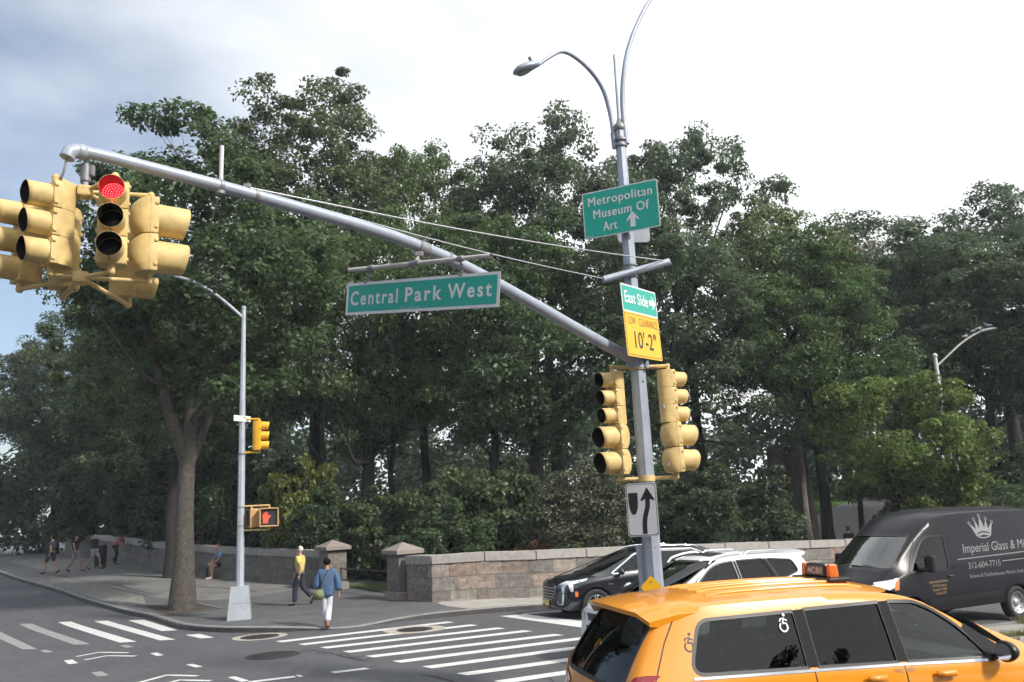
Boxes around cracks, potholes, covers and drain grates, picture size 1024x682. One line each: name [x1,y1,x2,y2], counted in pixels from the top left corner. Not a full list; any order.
manhole cover [232,633,288,641]
manhole cover [383,625,446,634]
manhole cover [245,651,300,660]
